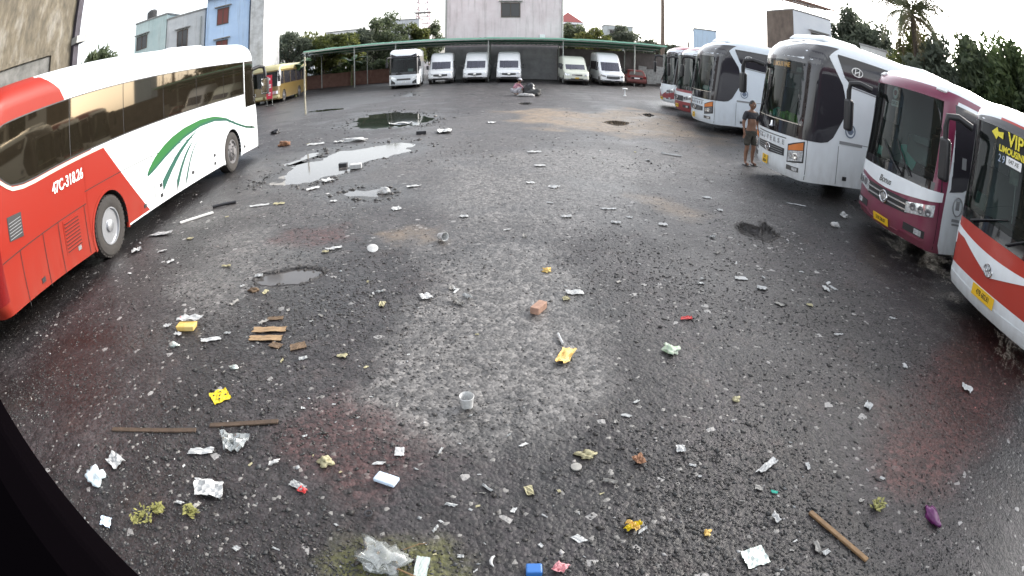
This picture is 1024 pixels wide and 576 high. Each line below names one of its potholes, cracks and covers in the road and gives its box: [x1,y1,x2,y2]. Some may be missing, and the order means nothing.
pothole [735,221,782,243]
pothole [251,264,330,287]
